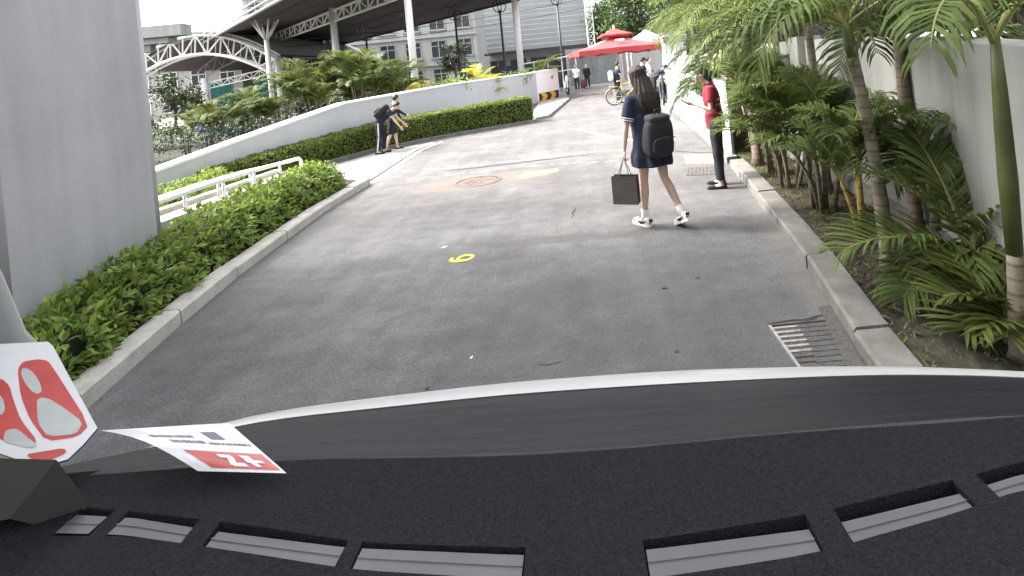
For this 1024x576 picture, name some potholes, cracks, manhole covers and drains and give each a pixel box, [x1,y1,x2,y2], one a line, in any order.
drain grate [768,319,848,367]
manhole cover [453,175,502,188]
